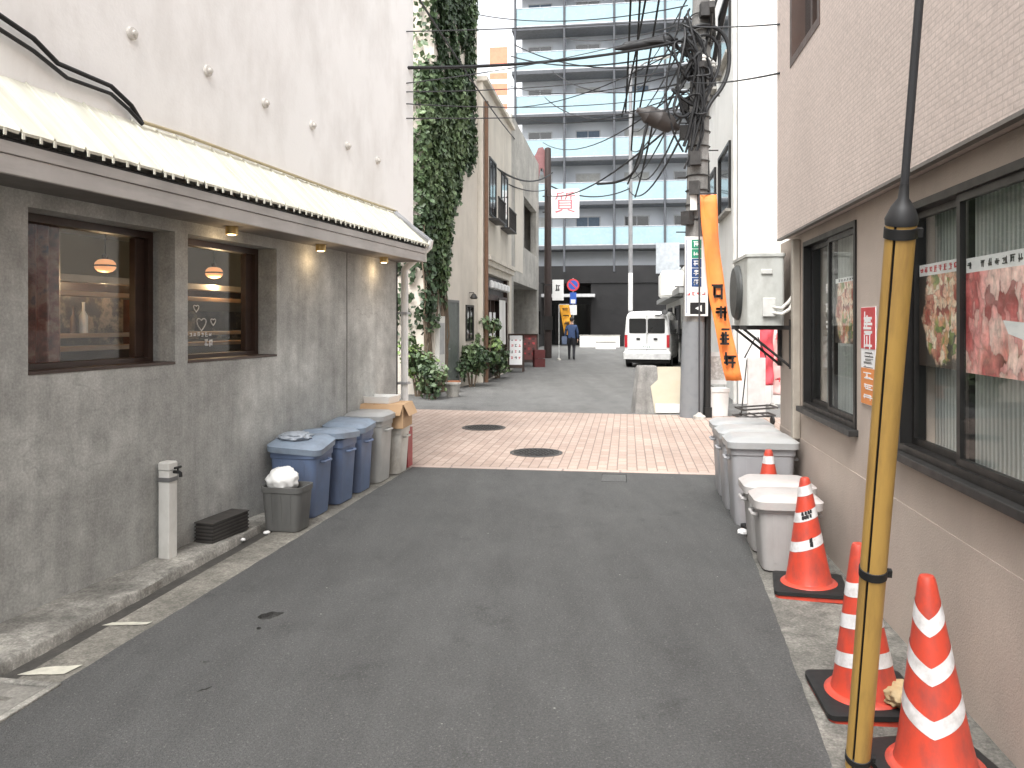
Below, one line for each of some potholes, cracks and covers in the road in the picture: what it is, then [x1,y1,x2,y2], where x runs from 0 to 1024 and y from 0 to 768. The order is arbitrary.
manhole cover [510,448,563,457]
utility cover [601,474,627,482]
